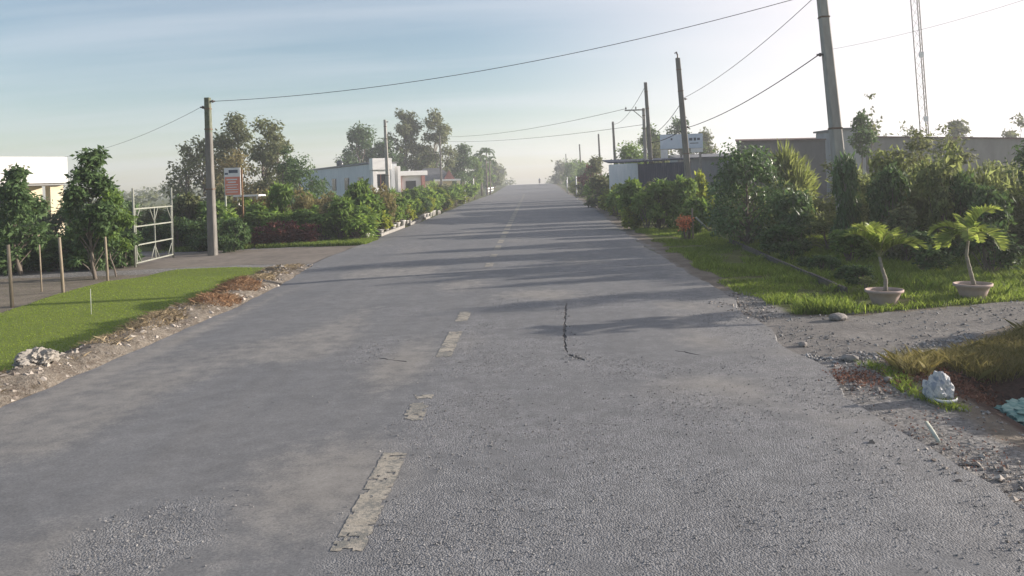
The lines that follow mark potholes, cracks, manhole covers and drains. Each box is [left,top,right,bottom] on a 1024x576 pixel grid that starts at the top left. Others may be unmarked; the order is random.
crack [562,303,584,360]
